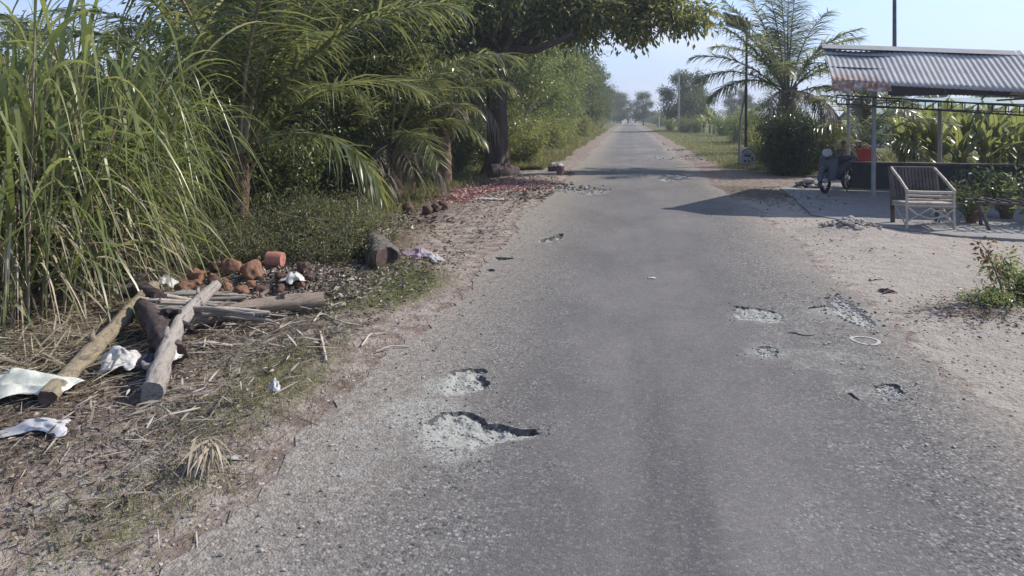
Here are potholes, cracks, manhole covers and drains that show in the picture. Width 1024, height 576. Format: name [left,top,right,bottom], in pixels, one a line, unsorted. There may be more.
pothole [538,233,569,244]
pothole [812,293,888,336]
pothole [426,366,507,401]
pothole [736,340,785,360]
pothole [721,303,794,329]
pothole [655,174,695,182]
pothole [398,405,550,473]
